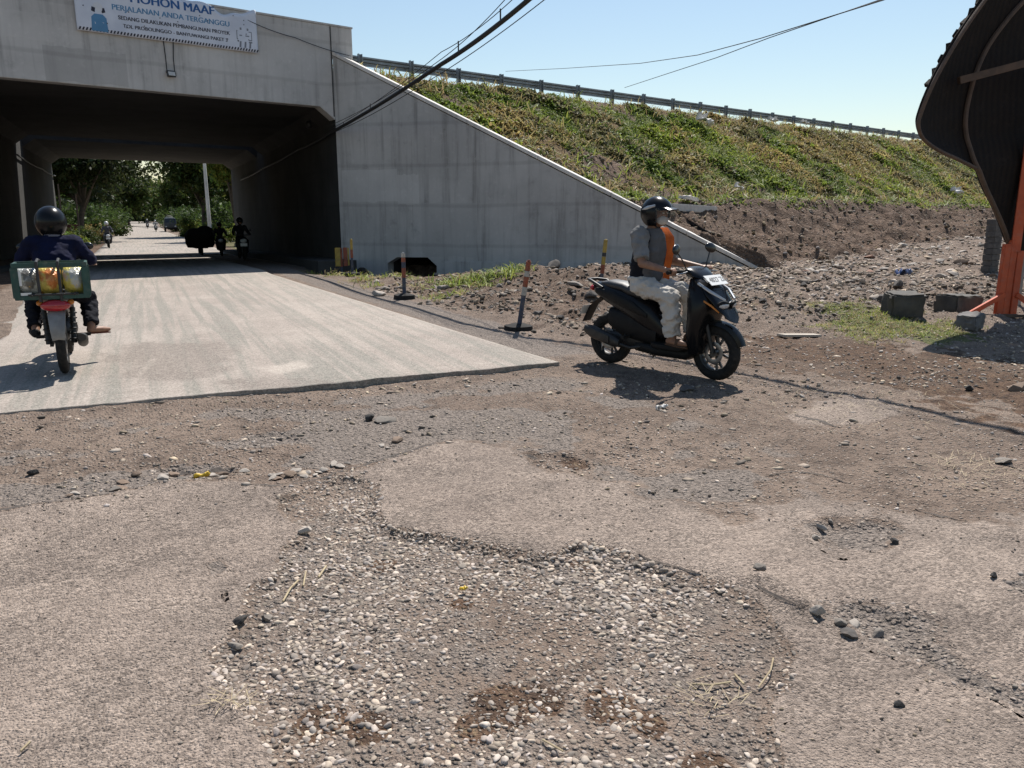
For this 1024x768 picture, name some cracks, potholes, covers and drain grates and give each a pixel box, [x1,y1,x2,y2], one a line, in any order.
pothole [784,511,918,560]
crack [794,414,841,428]
pothole [514,450,599,473]
pothole [185,472,808,768]
pothole [803,594,1024,719]
